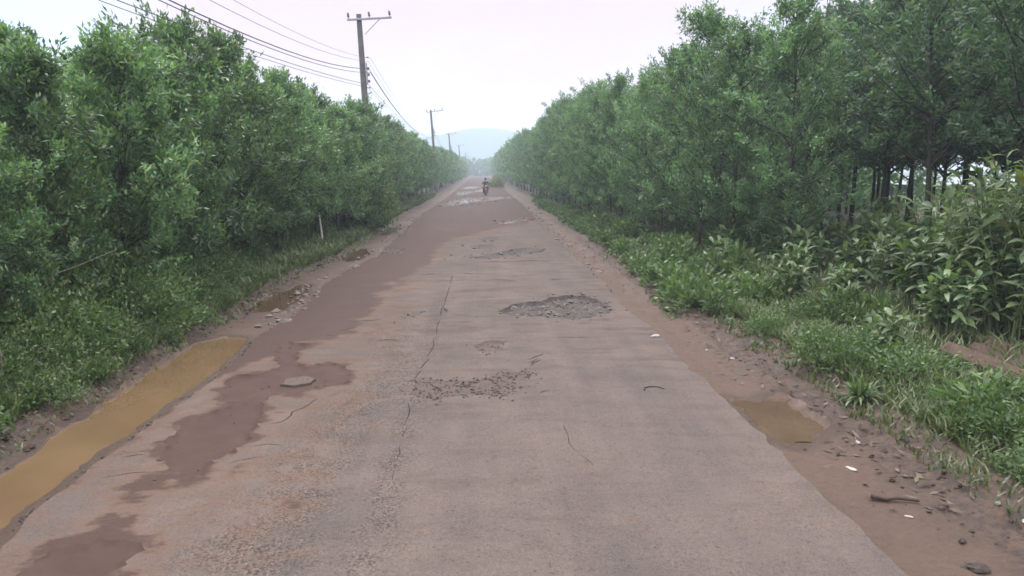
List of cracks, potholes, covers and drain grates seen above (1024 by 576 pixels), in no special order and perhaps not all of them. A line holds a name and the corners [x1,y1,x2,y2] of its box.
pothole [492,217,534,225]
crack [415,273,453,378]
pothole [435,196,516,207]
pothole [400,368,542,406]
pothole [469,340,513,355]
pothole [476,291,628,322]
pothole [444,245,546,260]
crack [270,398,318,424]
